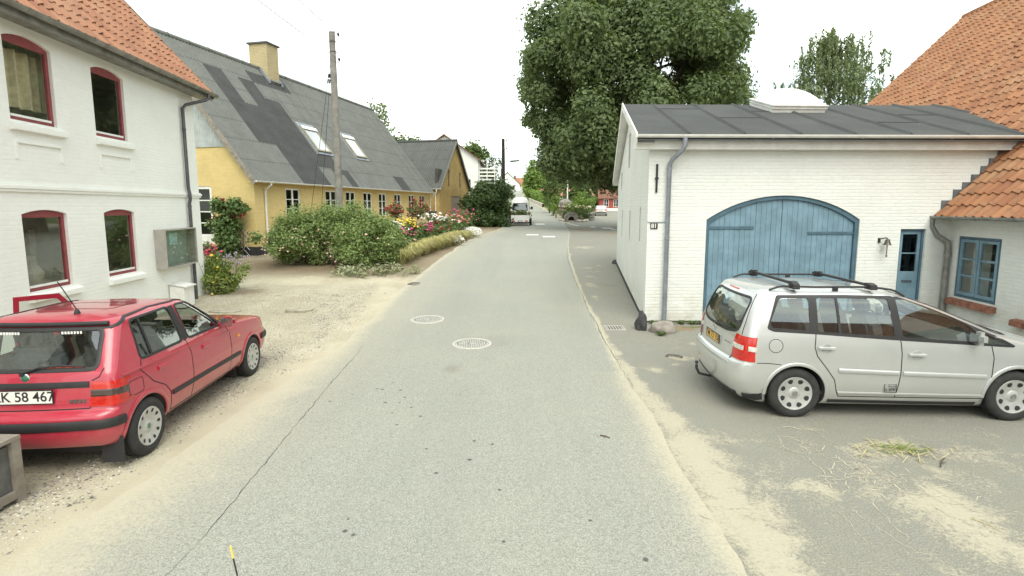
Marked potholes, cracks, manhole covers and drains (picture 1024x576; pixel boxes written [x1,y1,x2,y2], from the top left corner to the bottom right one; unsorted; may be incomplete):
manhole cover [452,338,492,349]
manhole cover [410,315,444,324]
